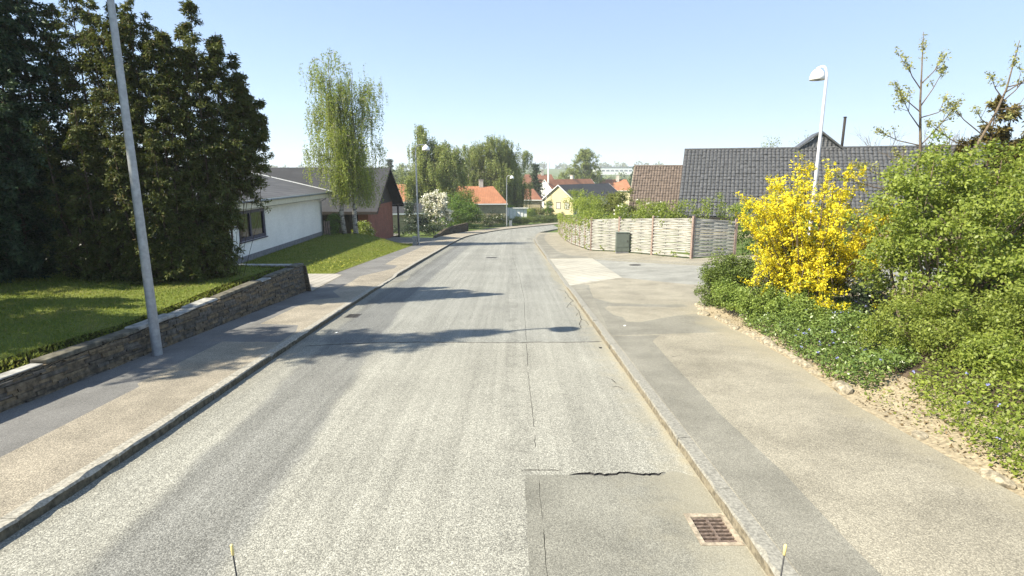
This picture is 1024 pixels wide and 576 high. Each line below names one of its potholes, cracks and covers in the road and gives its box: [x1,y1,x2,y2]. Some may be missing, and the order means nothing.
drain grate [683,513,746,546]
